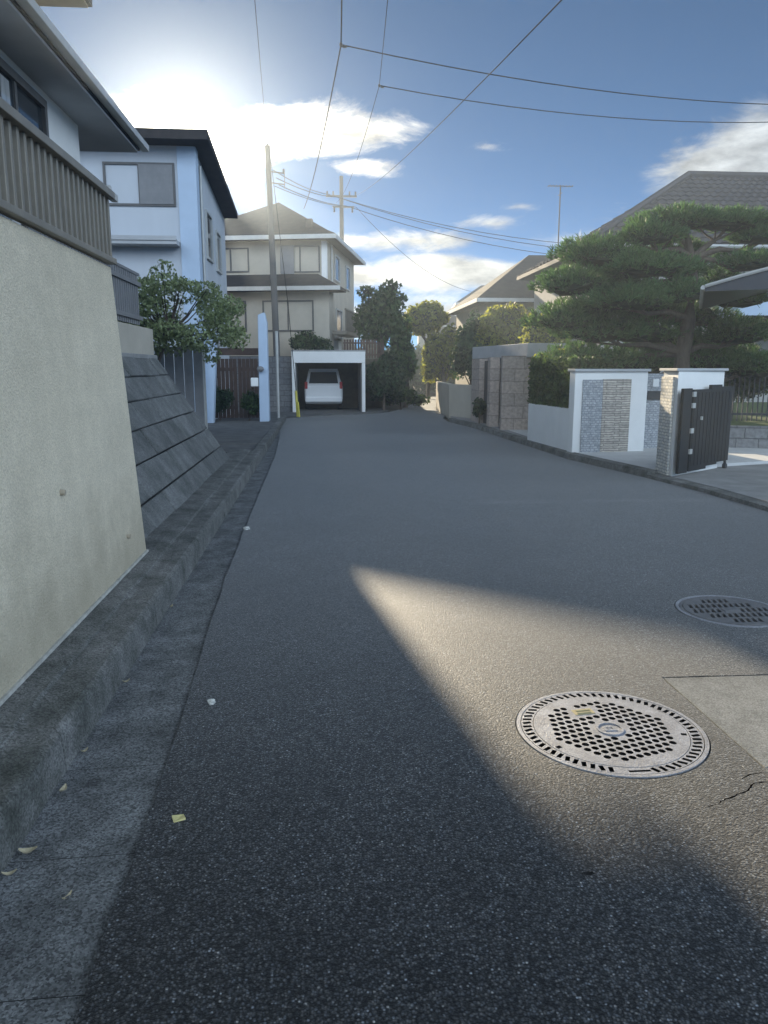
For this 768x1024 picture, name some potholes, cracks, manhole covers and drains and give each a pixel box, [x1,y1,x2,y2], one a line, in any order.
manhole cover [675,595,768,628]
manhole cover [516,691,710,778]
crack [705,772,763,808]
